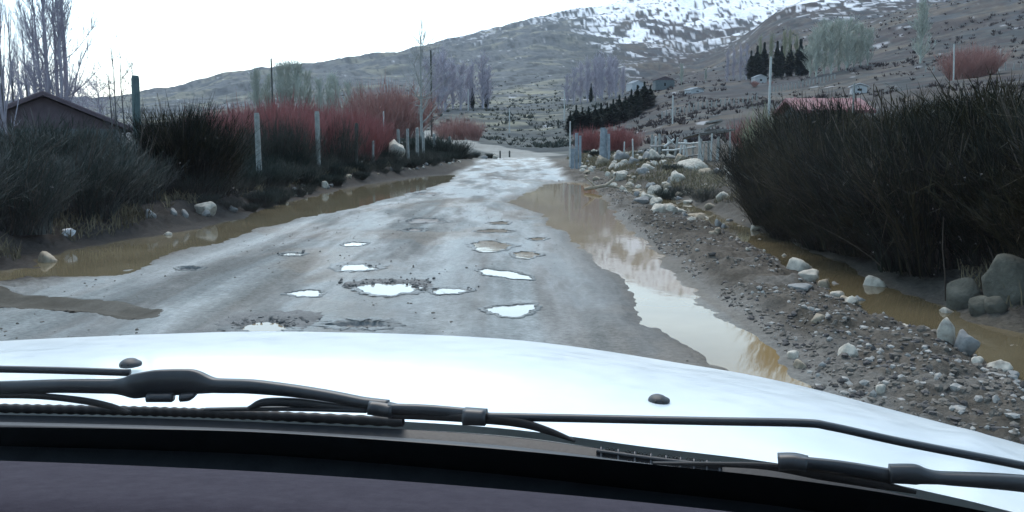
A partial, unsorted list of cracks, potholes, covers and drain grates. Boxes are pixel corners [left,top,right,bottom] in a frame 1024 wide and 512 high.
pothole [336,277,437,298]
pothole [476,302,543,319]
pothole [474,268,536,281]
pothole [466,240,521,253]
pothole [311,317,406,331]
pothole [280,288,328,298]
pothole [508,251,545,260]
pothole [423,285,480,296]
pothole [215,309,324,332]
pothole [327,260,392,273]
